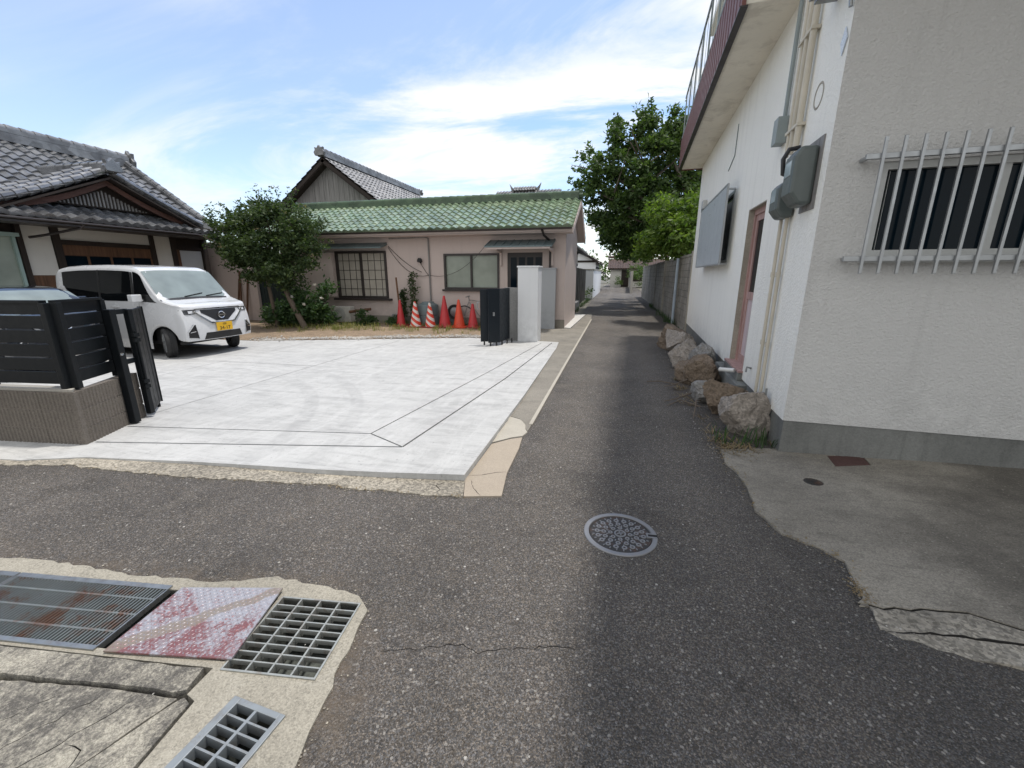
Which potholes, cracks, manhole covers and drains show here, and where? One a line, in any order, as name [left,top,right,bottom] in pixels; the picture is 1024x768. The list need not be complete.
drain grate [0,570,21,585]
manhole cover [584,513,658,557]
crack [383,644,579,654]
crack [858,603,1024,646]
drain grate [220,596,361,681]
drain grate [164,696,285,768]
crack [1,695,130,768]
